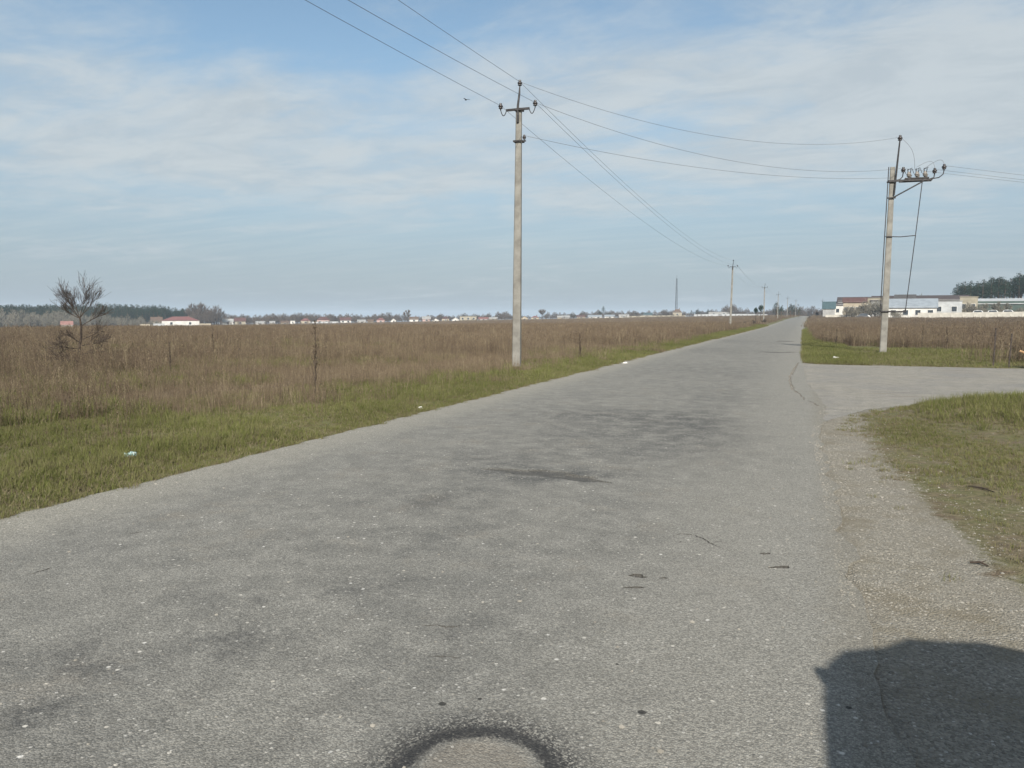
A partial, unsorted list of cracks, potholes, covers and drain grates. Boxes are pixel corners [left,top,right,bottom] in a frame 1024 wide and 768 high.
crack [769,352,819,406]
